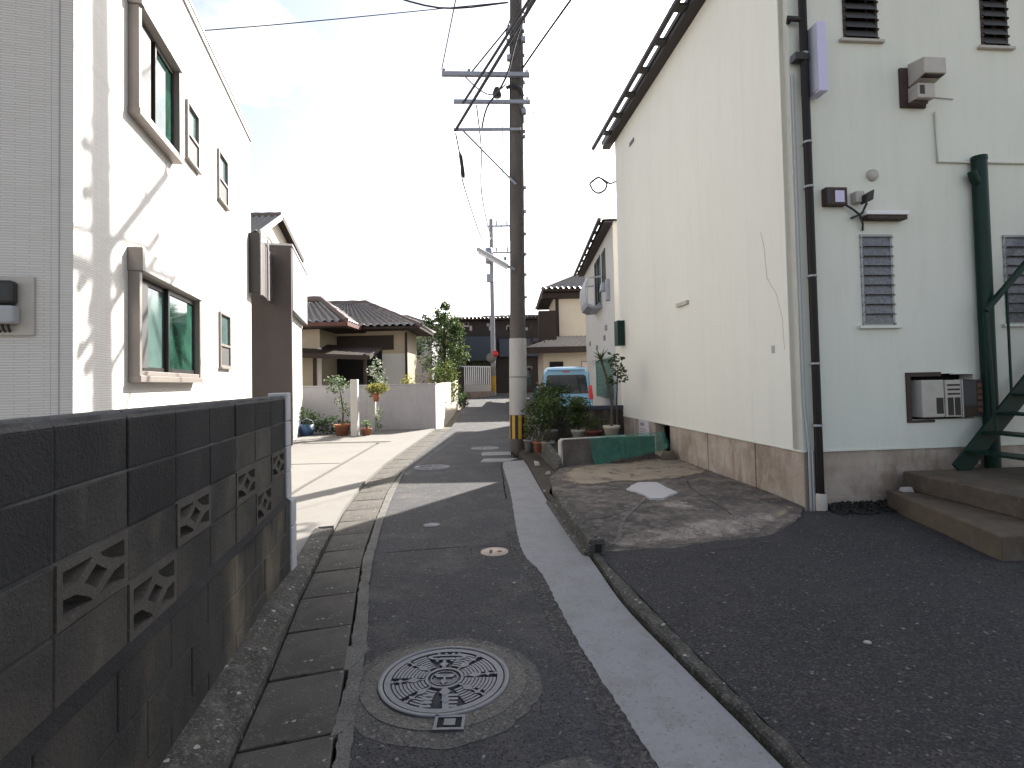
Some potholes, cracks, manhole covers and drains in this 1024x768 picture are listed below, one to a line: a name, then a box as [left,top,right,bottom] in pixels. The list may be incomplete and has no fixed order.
manhole cover [354,638,543,750]
utility cover [481,547,508,556]
